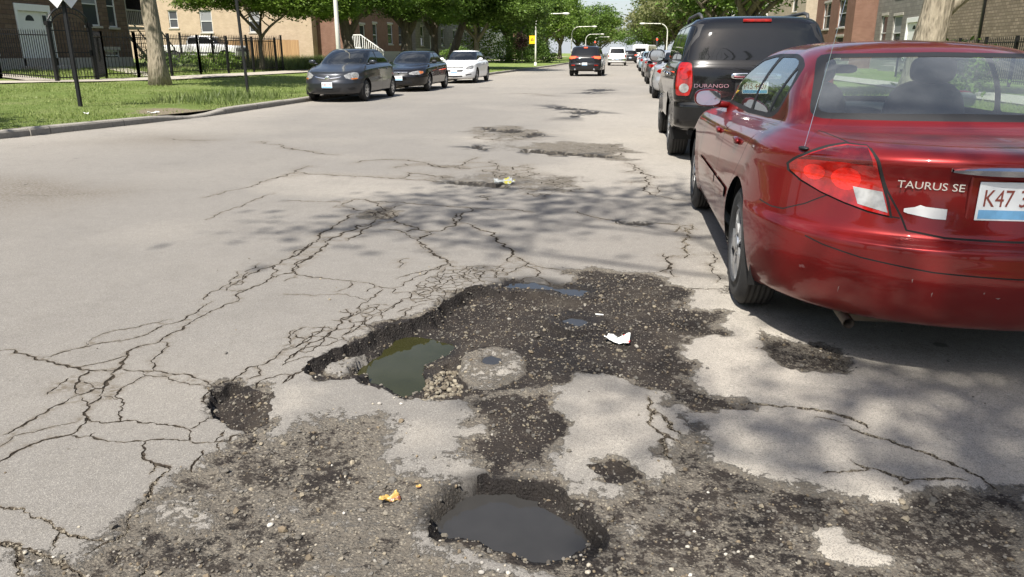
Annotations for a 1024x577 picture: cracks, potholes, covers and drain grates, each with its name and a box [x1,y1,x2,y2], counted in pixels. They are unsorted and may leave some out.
crack [577,211,721,291]
crack [739,402,997,491]
pothole [587,461,636,485]
crack [0,214,385,577]
pothole [428,473,610,567]
pothole [303,279,617,401]
crack [602,145,684,201]
crack [282,195,559,382]
crack [359,157,580,197]
pothole [207,383,275,434]
